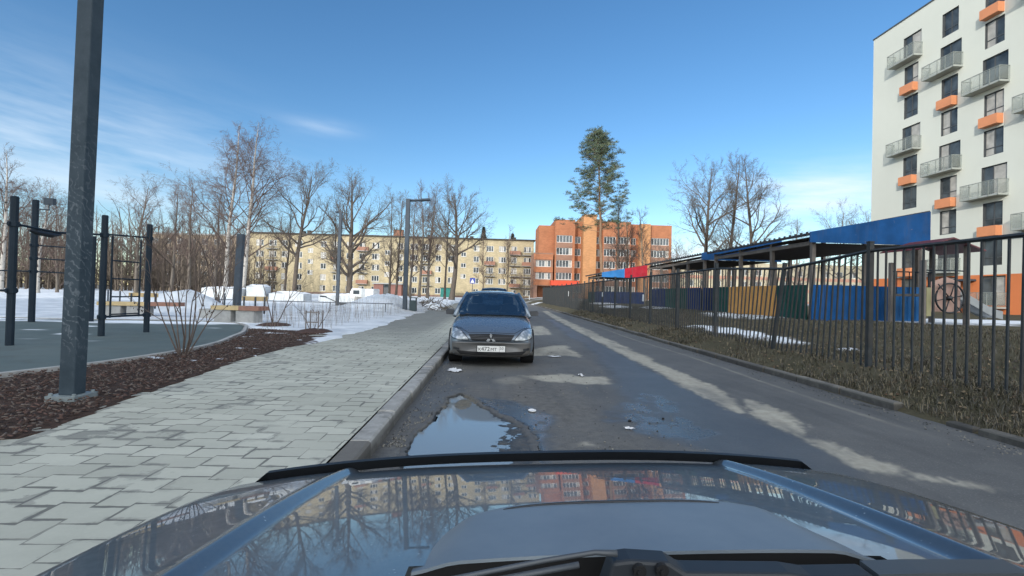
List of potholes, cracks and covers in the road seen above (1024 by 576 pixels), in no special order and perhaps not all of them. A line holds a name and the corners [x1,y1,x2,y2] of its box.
pothole [389,393,541,470]
